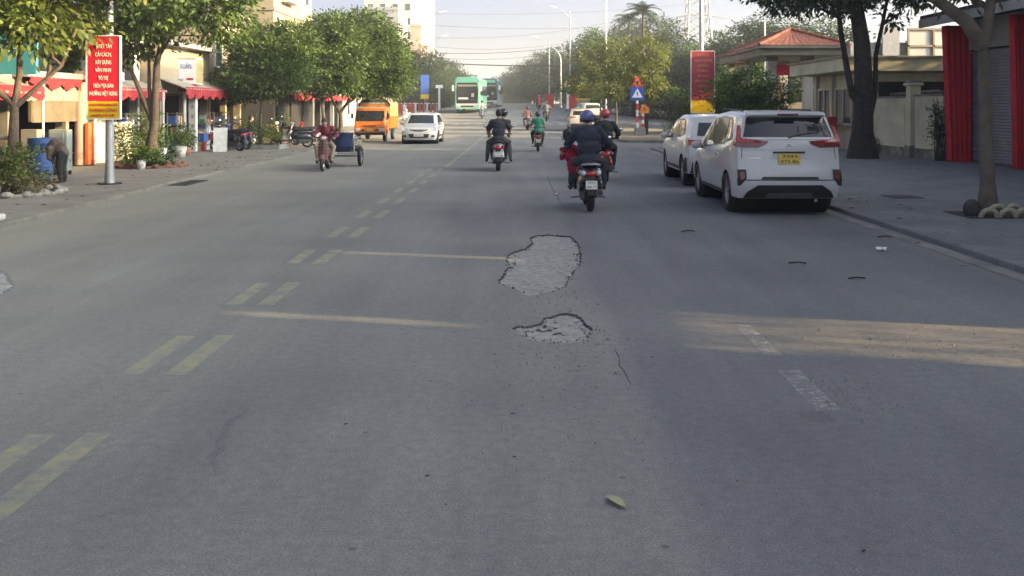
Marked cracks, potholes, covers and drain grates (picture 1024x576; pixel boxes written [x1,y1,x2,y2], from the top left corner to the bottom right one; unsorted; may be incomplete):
pothole [497,234,582,297]
pothole [512,313,593,343]
pothole [0,271,15,294]
